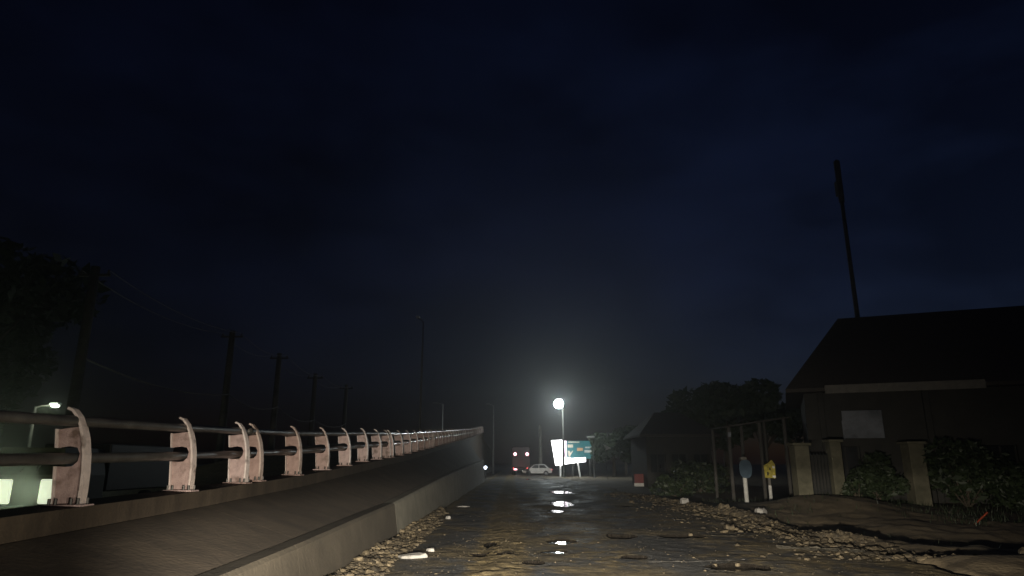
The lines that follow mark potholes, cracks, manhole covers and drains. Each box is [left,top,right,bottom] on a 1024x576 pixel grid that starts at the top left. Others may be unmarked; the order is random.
pothole [696,562,778,573]
crack [776,545,865,553]
pothole [480,541,501,549]
